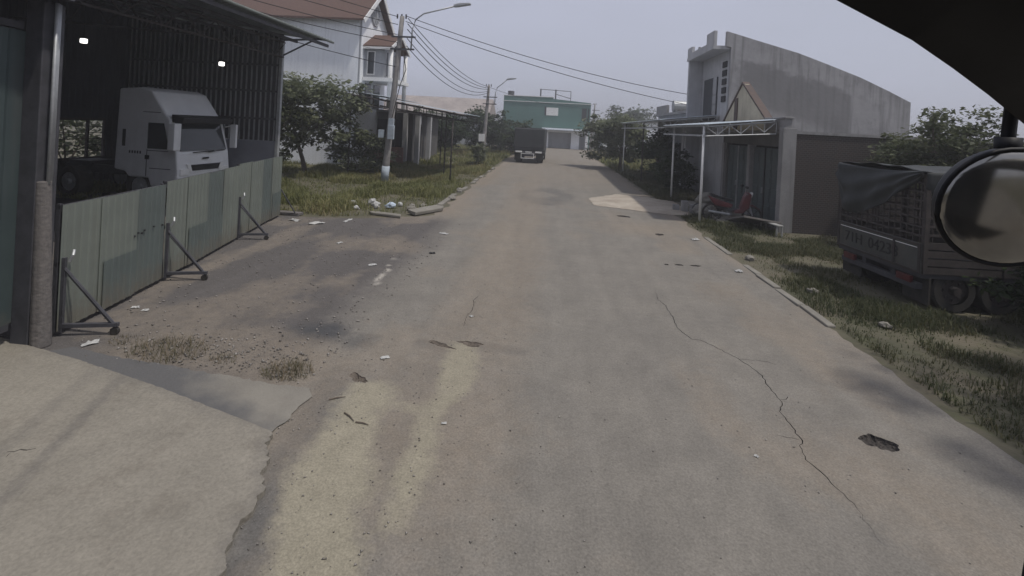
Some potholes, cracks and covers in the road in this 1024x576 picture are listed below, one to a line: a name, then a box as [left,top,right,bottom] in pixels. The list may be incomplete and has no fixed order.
pothole [858,433,900,452]
crack [660,301,876,537]
